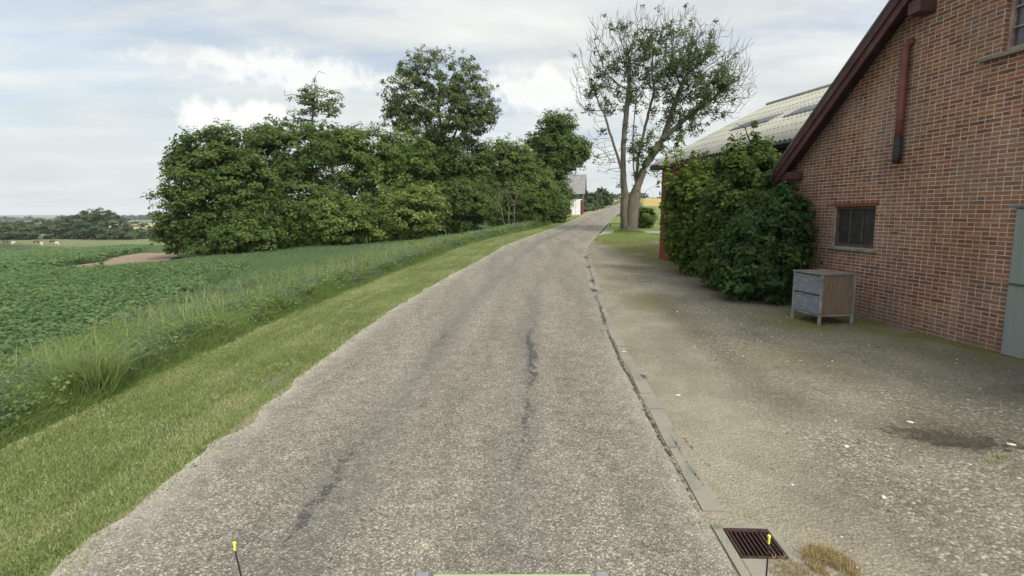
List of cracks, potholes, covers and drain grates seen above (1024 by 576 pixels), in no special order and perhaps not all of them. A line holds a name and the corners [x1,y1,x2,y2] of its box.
drain grate [711,524,810,576]
crack [509,322,538,499]
crack [287,437,370,539]
